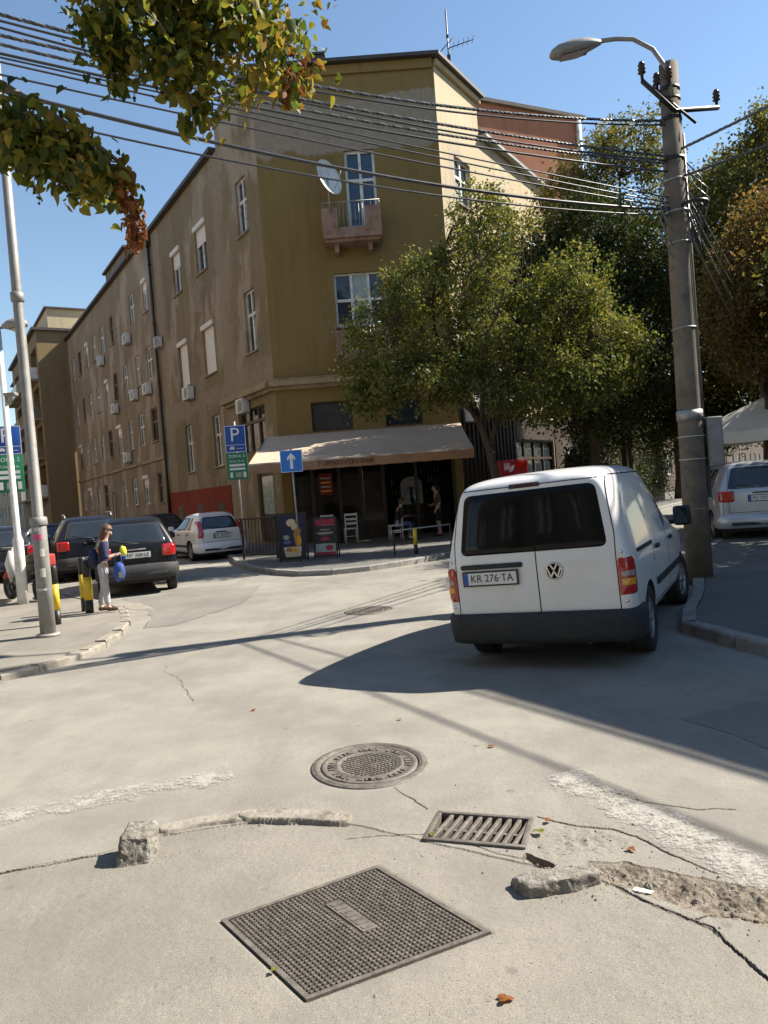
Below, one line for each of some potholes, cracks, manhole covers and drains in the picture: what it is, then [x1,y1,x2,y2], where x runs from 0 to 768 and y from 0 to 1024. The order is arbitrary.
drain grate [422,810,534,850]
manhole cover [311,743,428,790]
manhole cover [221,865,491,1003]
manhole cover [344,606,394,615]
crack [393,787,428,810]
crack [0,853,111,875]
pothole [587,861,768,927]
crack [536,782,768,981]
